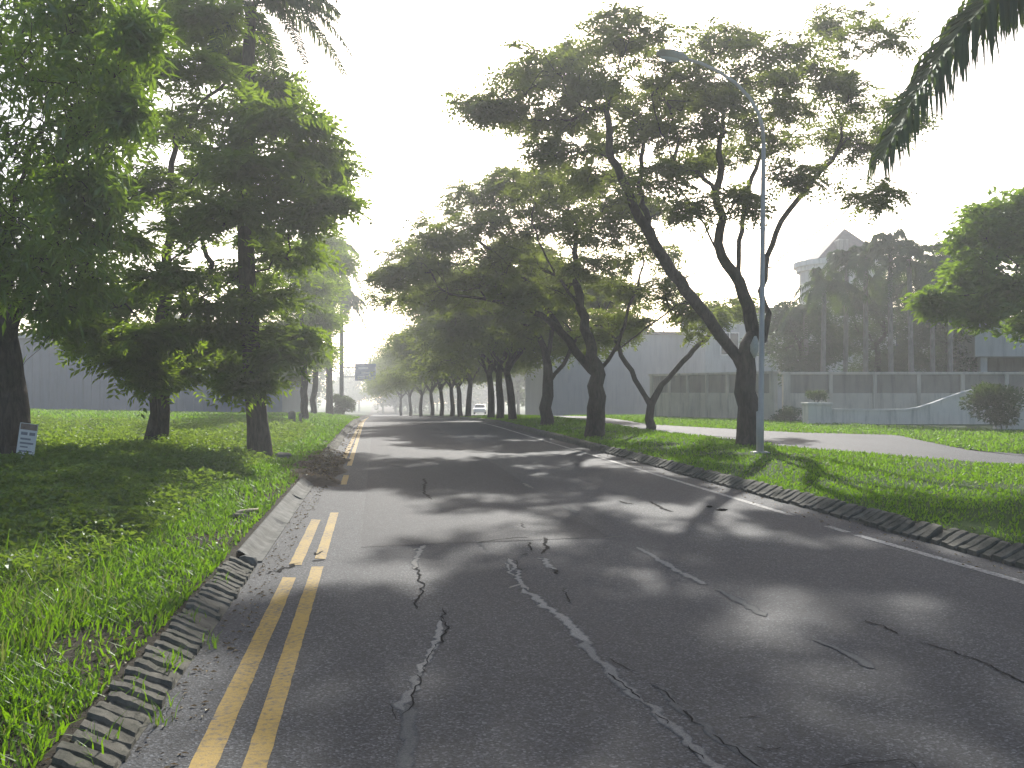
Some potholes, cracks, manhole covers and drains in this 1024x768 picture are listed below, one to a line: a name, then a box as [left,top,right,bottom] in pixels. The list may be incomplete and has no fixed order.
crack [504,523,780,768]
crack [390,545,450,768]
crack [422,479,432,499]
crack [865,620,1024,682]
